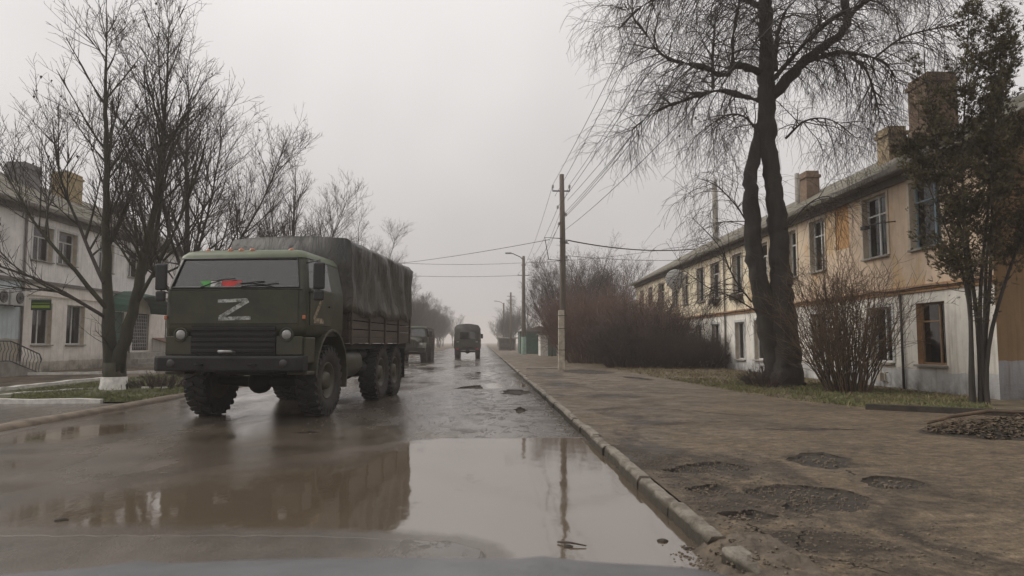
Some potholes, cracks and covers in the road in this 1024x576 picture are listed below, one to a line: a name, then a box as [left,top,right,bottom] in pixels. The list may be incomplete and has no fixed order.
pothole [786,452,852,469]
pothole [660,461,753,474]
pothole [742,484,873,515]
pothole [717,509,779,521]
pothole [860,475,925,490]
pothole [685,484,730,495]
